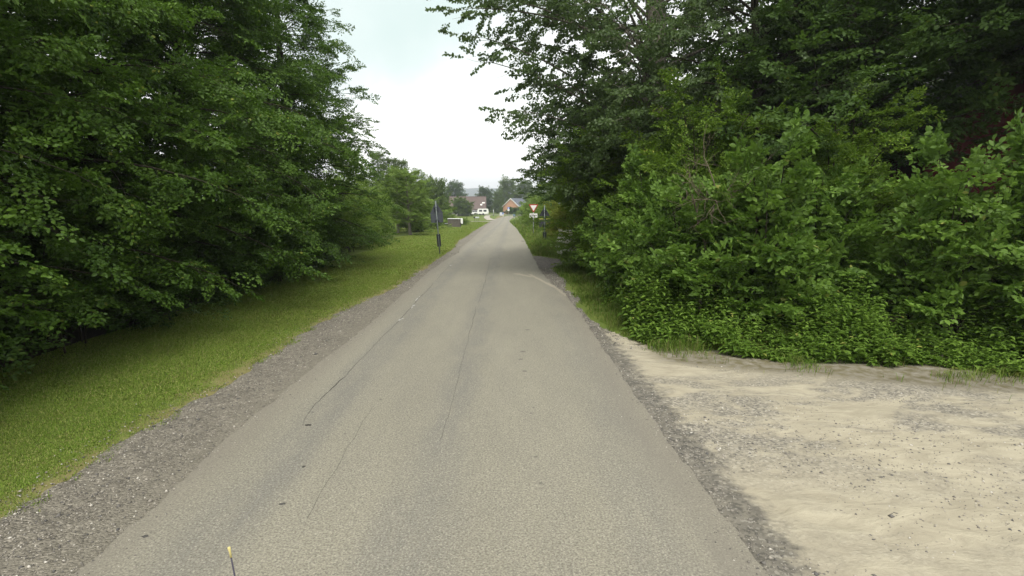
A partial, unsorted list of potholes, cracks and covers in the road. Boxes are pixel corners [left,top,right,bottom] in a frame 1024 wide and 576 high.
crack [303,262,454,424]
